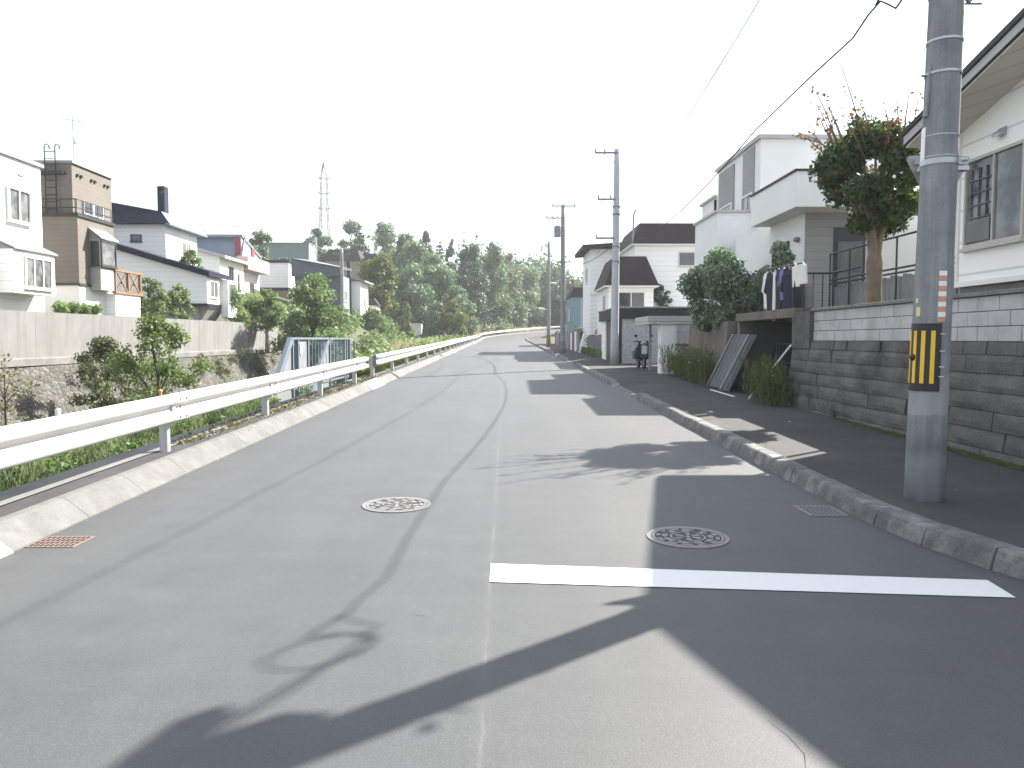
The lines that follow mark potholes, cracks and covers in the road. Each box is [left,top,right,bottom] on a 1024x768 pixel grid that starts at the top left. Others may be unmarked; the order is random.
manhole cover [362,497,431,513]
drain grate [793,505,850,517]
manhole cover [647,526,730,549]
drain grate [24,536,95,548]
